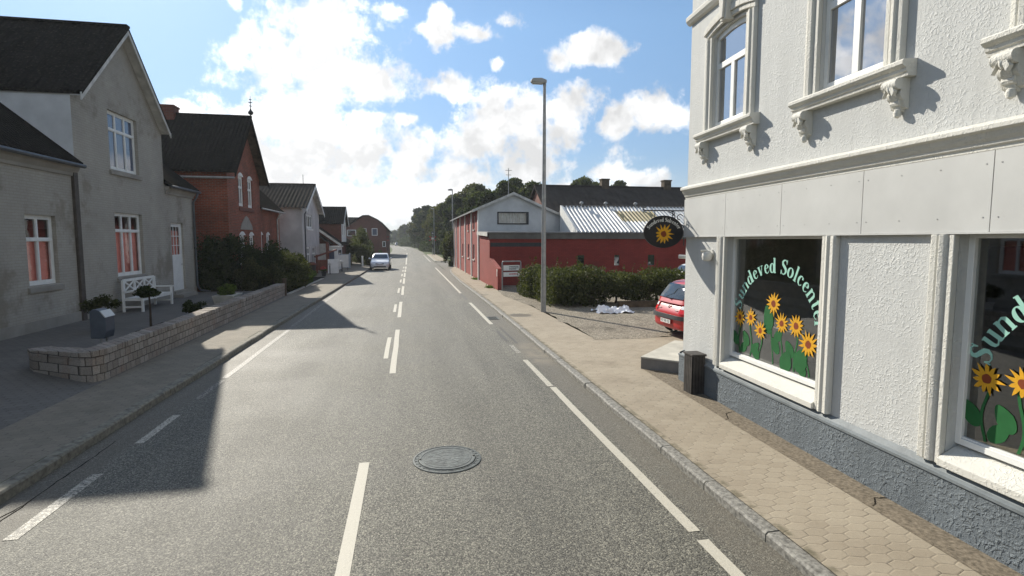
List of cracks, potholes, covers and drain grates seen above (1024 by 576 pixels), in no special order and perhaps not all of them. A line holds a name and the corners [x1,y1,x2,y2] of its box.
manhole cover [413,446,481,474]
